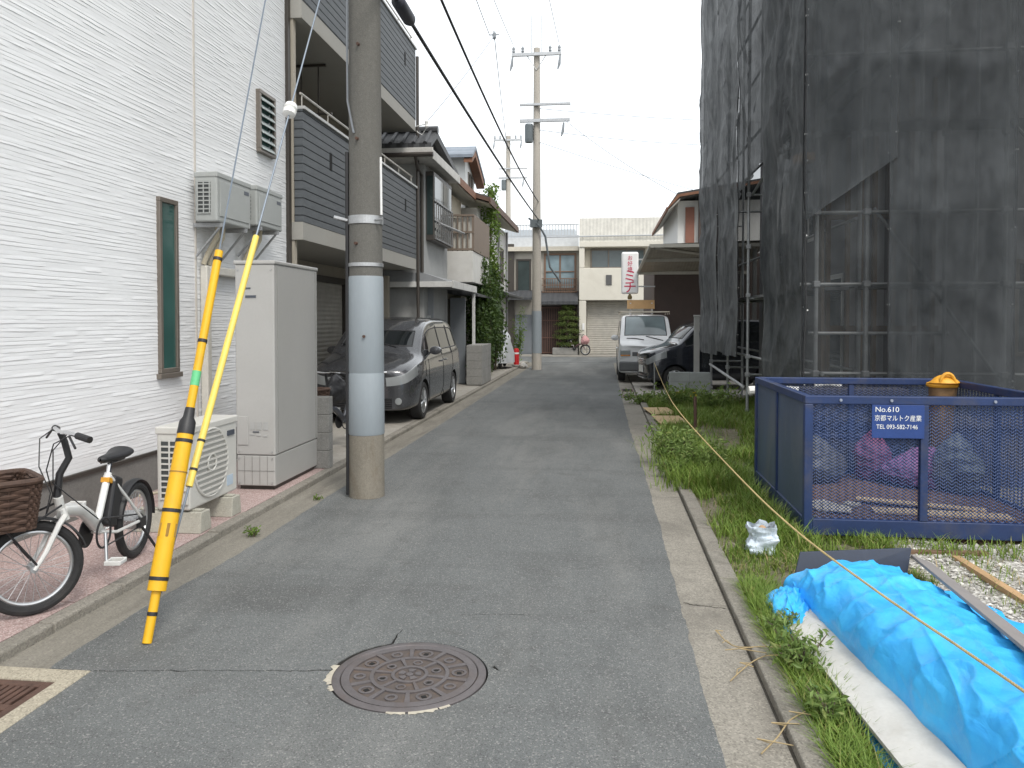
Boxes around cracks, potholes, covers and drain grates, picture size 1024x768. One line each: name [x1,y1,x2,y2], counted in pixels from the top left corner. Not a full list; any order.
drain grate [0,666,91,733]
crack [96,632,401,672]
manhole cover [323,642,486,715]
